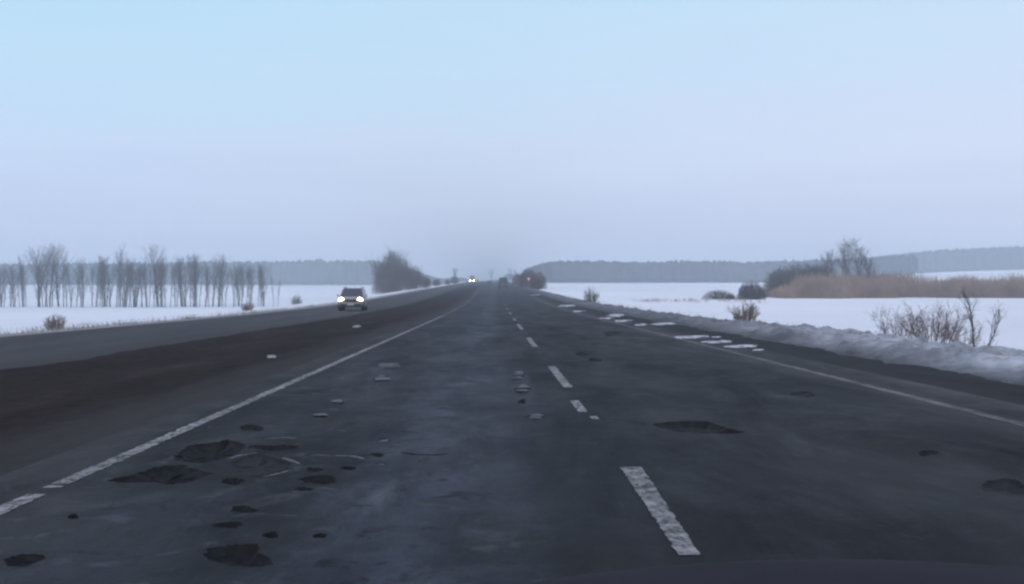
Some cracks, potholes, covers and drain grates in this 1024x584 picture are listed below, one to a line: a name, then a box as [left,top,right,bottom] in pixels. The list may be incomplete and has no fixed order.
pothole [108,465,214,485]
pothole [980,478,1024,495]
pothole [211,521,243,529]
pothole [297,475,337,484]
pothole [203,544,274,567]
pothole [4,554,46,567]
pothole [653,421,743,434]
pothole [174,439,246,463]
pothole [230,505,259,513]
